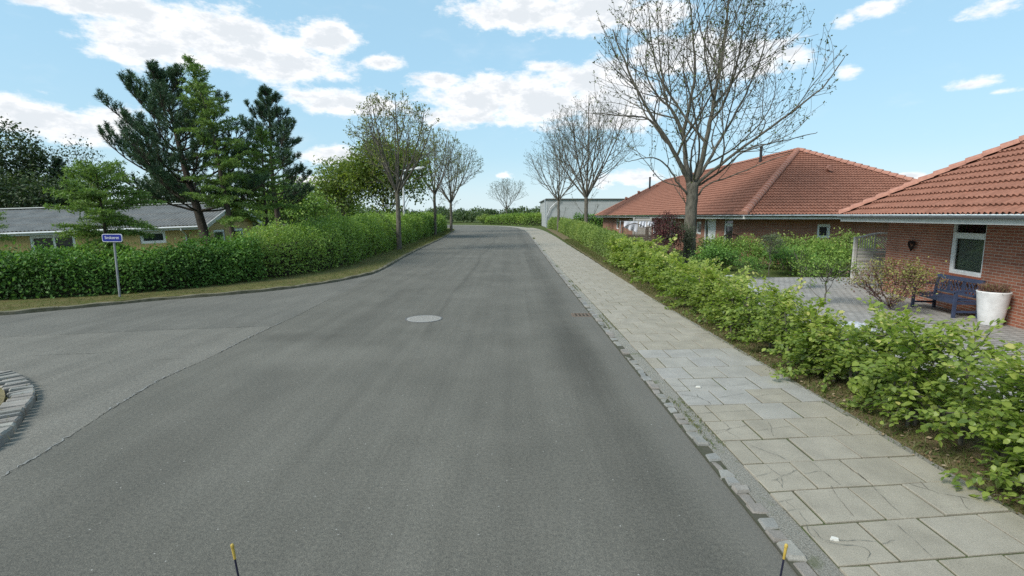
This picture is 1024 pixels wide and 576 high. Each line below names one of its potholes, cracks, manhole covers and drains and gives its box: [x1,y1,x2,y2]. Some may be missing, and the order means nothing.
manhole cover [405,315,443,323]
